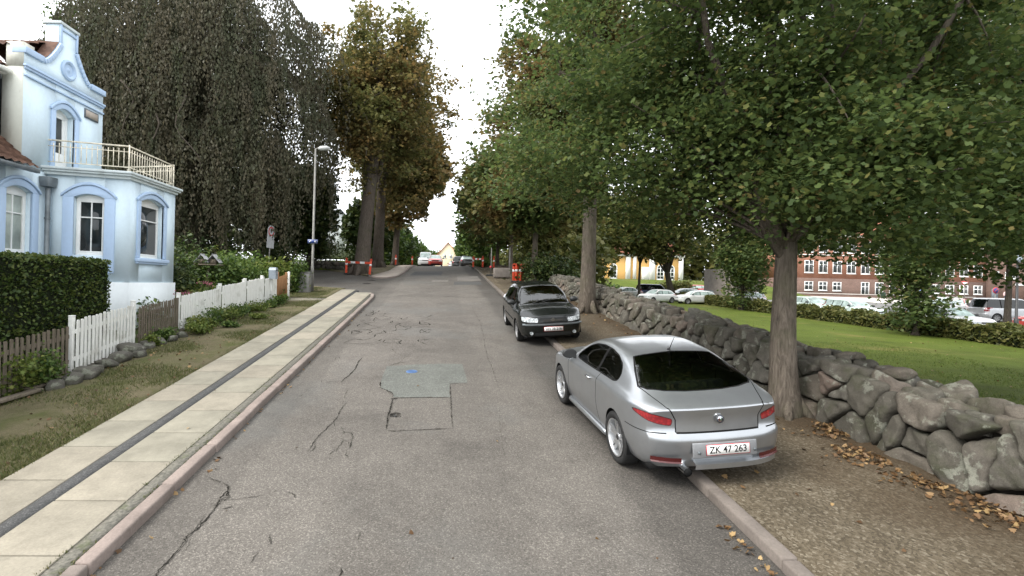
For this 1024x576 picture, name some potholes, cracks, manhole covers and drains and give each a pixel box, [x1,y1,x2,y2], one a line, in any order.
crack [153,478,296,576]
crack [344,311,431,365]
crack [301,358,362,456]
